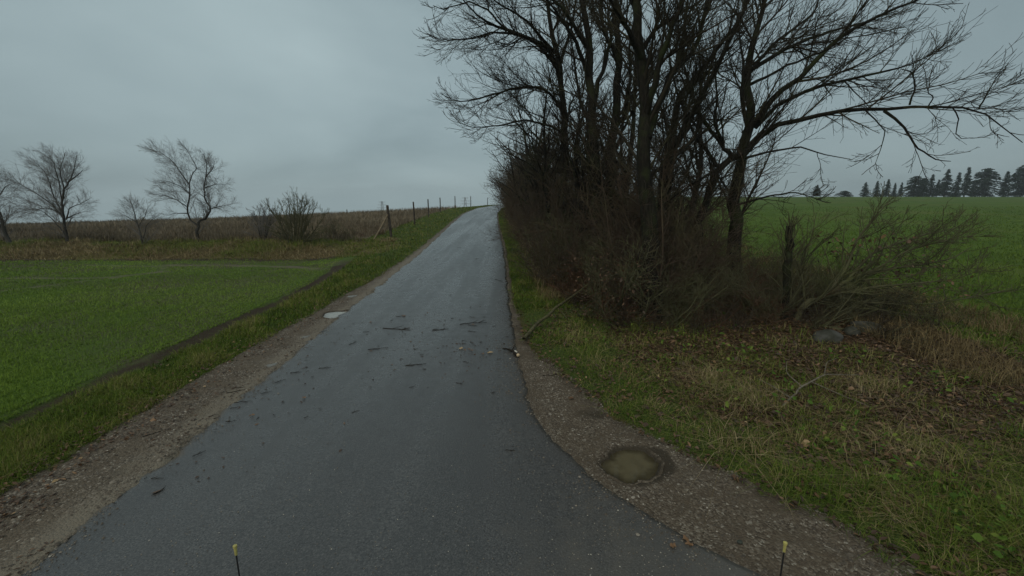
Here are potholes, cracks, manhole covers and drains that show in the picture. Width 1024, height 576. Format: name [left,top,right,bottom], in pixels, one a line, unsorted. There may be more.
pothole [595,445,665,485]
pothole [321,309,348,319]
